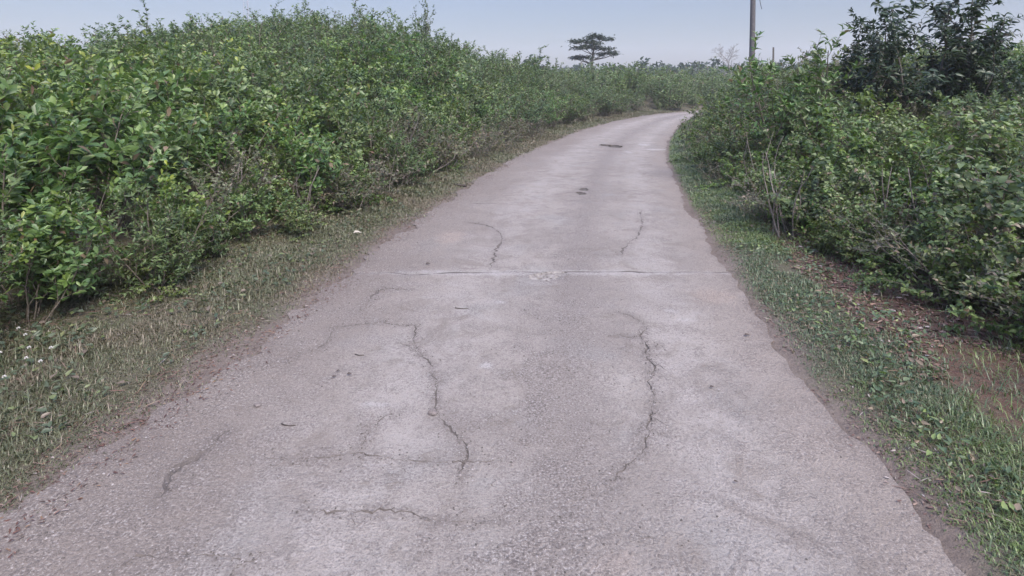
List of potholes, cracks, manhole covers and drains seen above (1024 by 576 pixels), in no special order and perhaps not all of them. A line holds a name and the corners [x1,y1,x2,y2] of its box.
crack [610,312,667,485]
crack [469,222,503,267]
crack [161,431,226,498]
crack [265,288,496,479]
crack [305,507,481,529]
crack [597,212,643,255]
